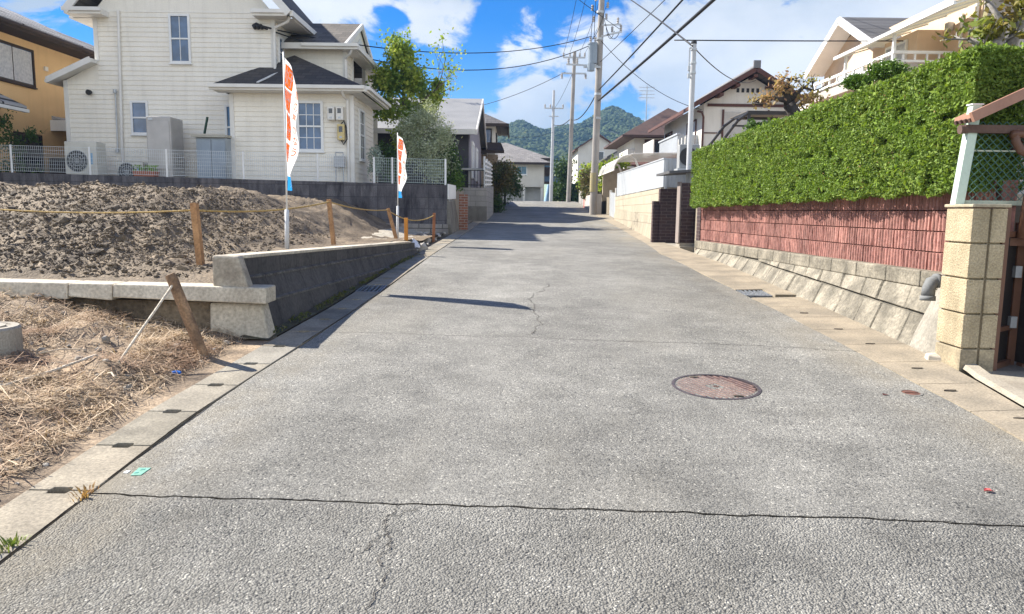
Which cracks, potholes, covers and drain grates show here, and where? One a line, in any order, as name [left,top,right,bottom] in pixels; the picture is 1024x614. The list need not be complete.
crack [0,403,1024,614]
drain grate [737,290,773,298]
manhole cover [671,374,762,400]
drain grate [355,285,387,293]
